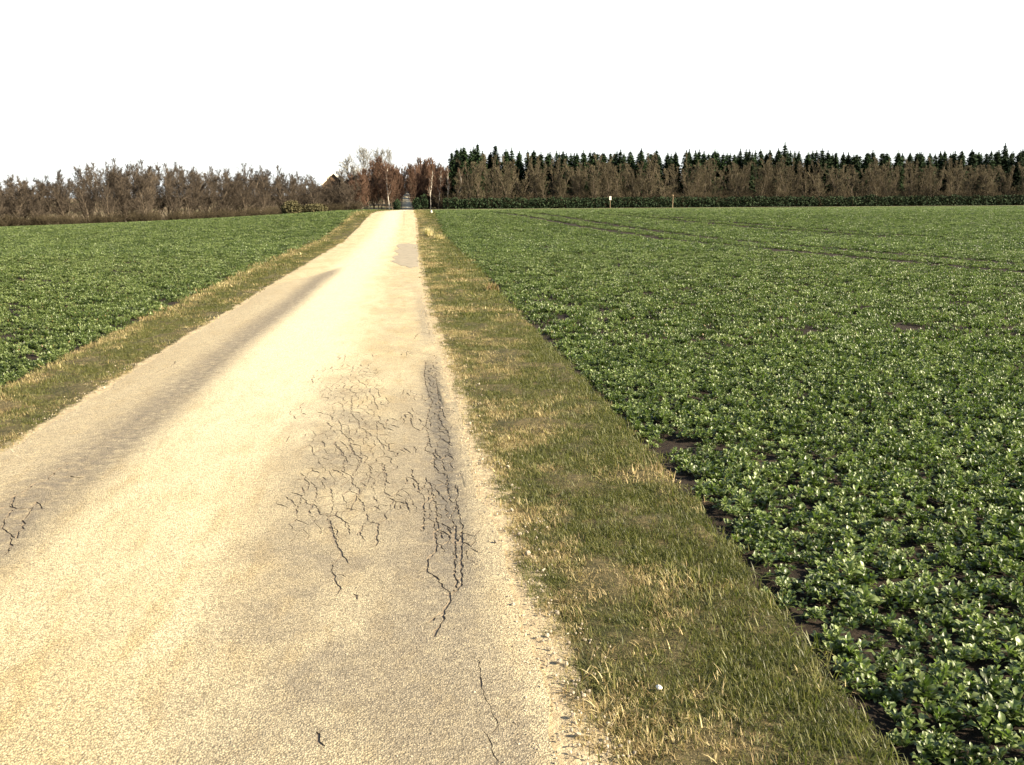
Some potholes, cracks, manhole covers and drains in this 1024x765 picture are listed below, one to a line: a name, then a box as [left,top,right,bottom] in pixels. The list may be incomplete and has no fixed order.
crack [0,463,83,555]
crack [478,661,499,761]
crack [228,351,480,637]
